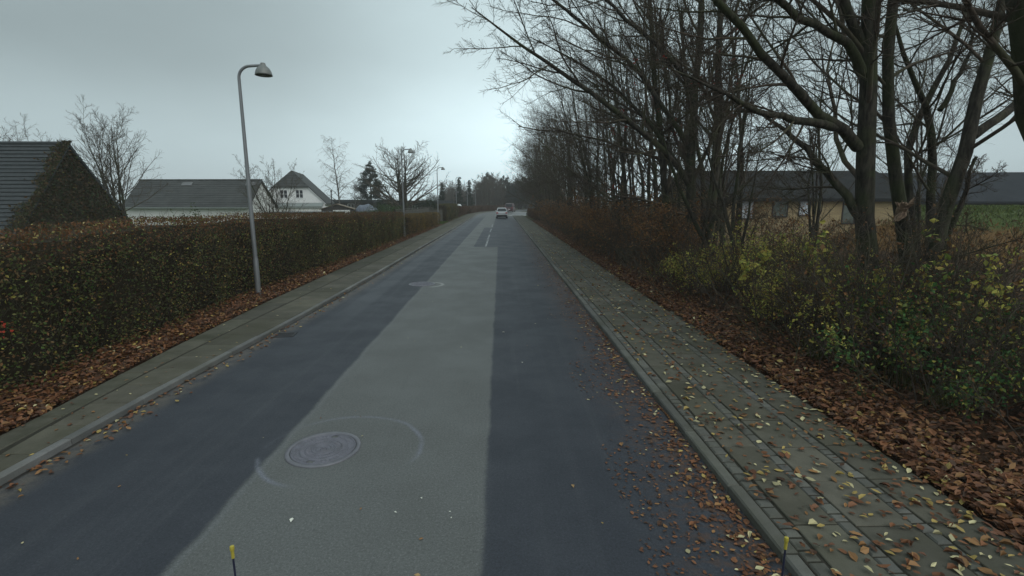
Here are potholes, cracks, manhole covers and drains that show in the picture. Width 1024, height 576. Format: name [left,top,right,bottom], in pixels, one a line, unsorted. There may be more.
manhole cover [284,432,361,468]
